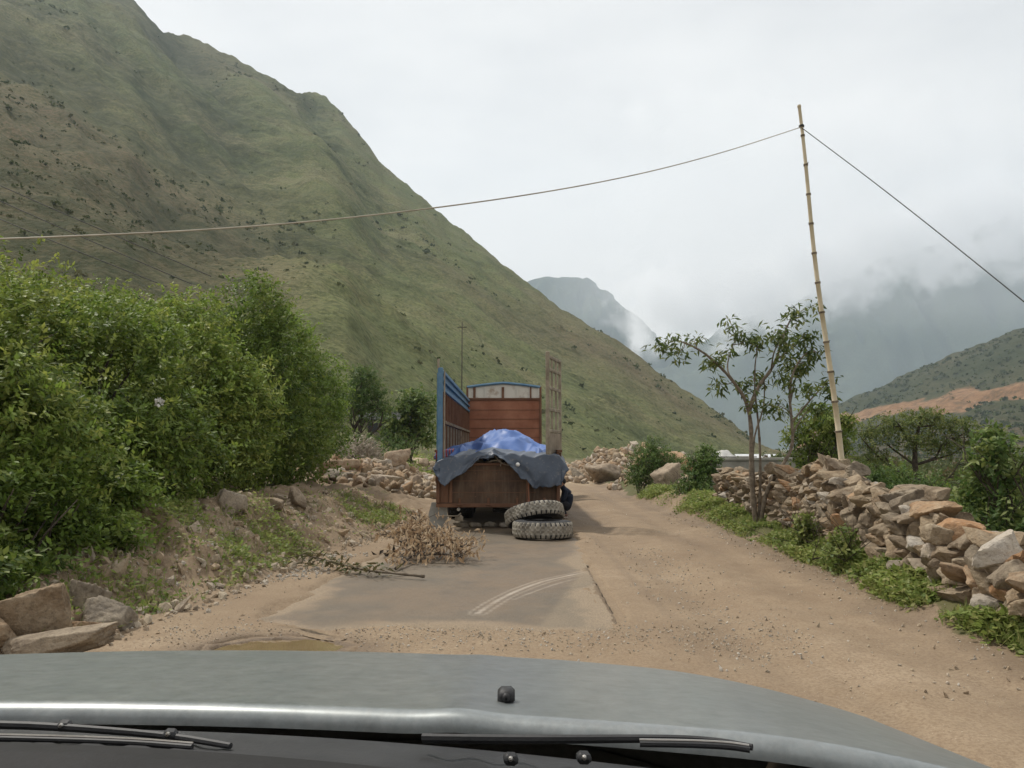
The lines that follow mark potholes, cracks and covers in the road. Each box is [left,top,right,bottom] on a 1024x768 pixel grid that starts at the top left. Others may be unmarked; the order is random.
pothole [202,635,365,652]
crack [580,568,627,624]
